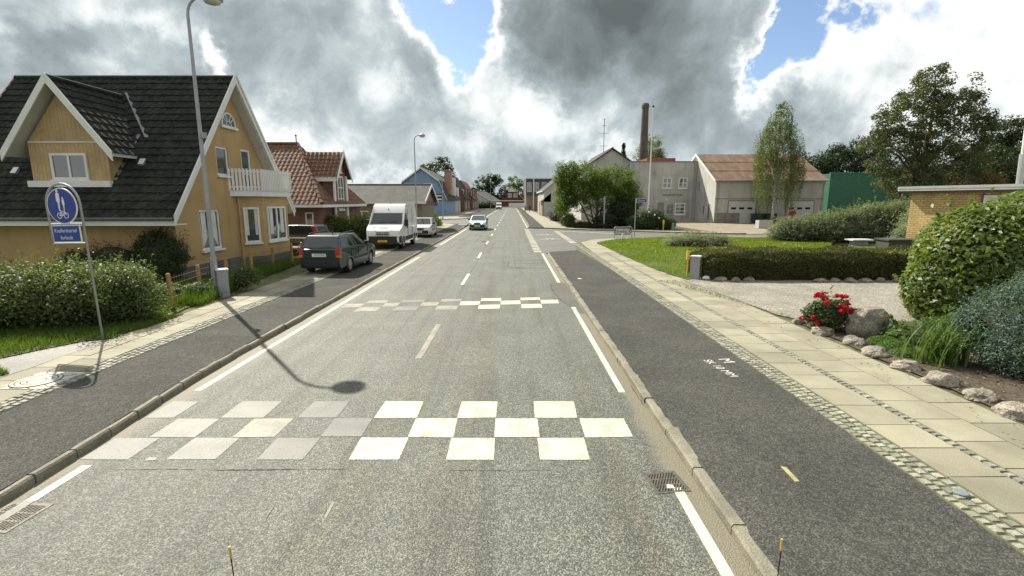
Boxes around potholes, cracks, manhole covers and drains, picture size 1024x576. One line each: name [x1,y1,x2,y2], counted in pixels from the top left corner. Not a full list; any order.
drain grate [642,471,691,494]
drain grate [0,501,54,533]
manhole cover [0,372,84,390]
